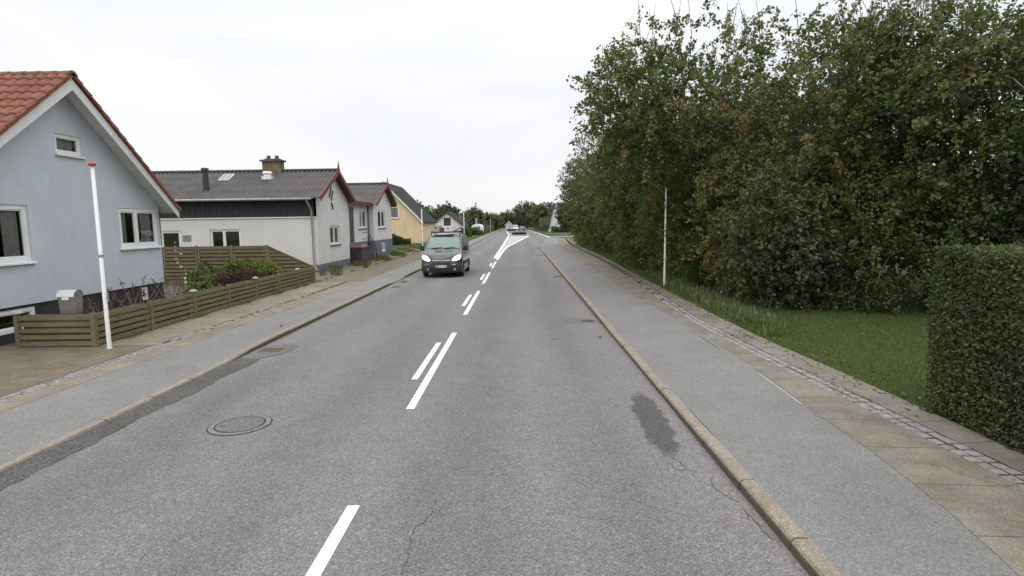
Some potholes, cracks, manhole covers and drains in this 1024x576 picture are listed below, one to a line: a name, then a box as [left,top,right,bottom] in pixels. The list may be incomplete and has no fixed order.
crack [670,458,771,538]
manhole cover [206,414,273,436]
